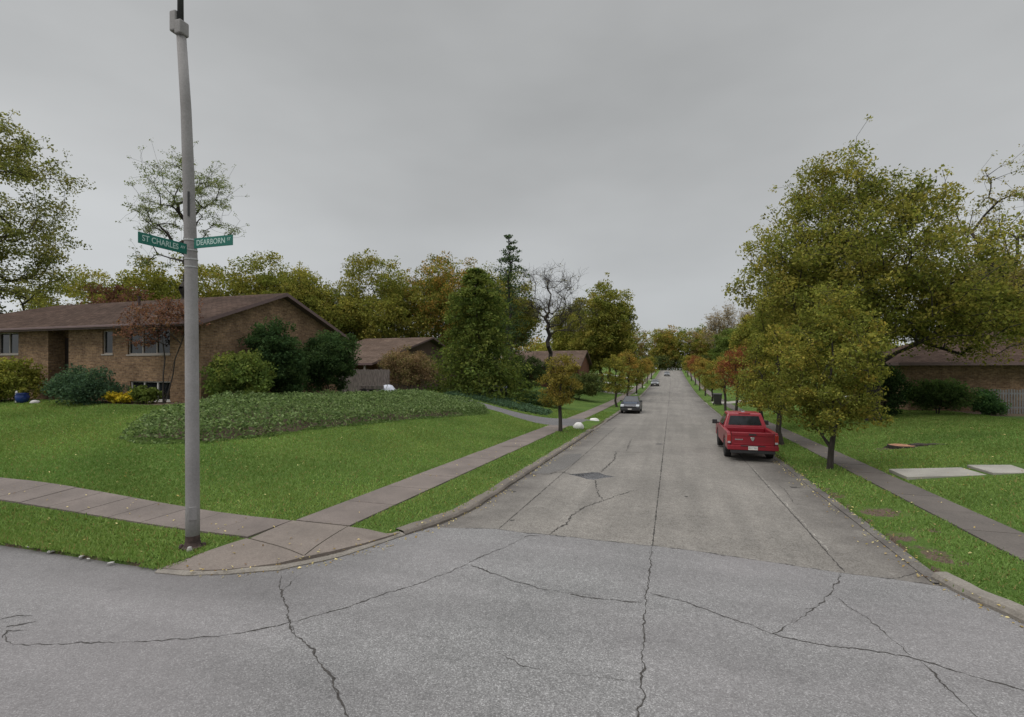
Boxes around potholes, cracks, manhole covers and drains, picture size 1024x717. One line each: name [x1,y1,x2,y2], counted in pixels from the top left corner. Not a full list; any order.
crack [2,441,631,717]
crack [470,551,1023,717]
